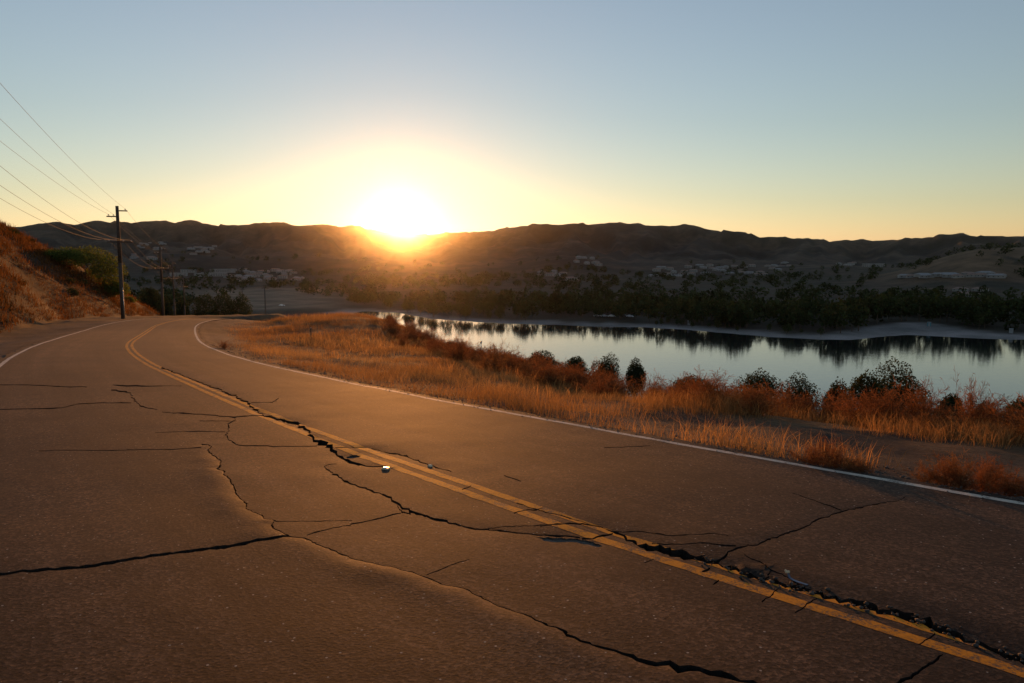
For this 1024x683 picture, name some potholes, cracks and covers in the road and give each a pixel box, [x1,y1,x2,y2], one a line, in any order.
crack [0,367,1024,683]
